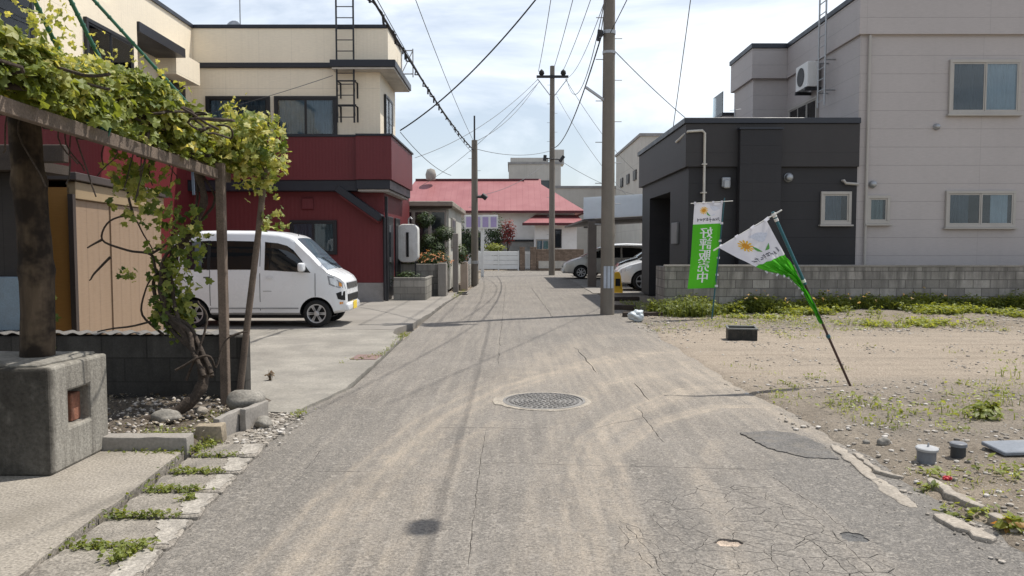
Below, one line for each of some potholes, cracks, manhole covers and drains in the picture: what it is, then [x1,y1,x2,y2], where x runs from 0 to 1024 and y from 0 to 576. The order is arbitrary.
pothole [713,538,743,547]
pothole [840,532,870,543]
crack [619,477,895,576]
manhole cover [492,392,591,412]
